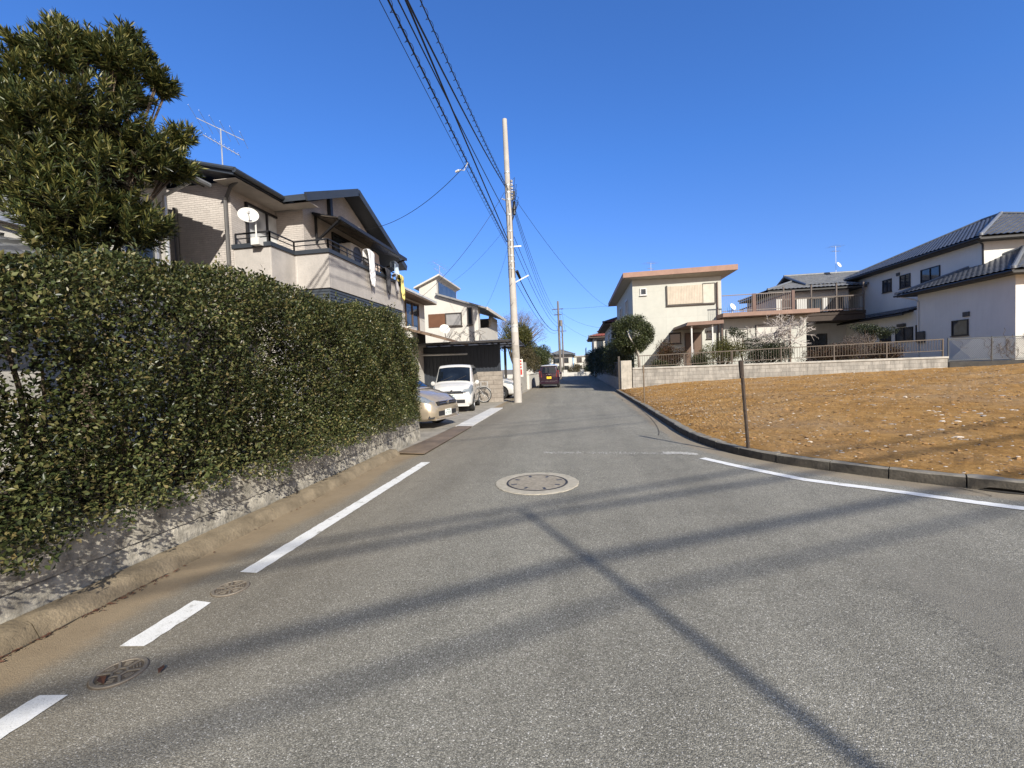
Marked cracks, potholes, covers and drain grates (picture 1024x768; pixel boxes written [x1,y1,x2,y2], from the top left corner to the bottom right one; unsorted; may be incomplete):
manhole cover [496,472,579,495]
manhole cover [210,580,251,597]
manhole cover [87,657,150,690]
